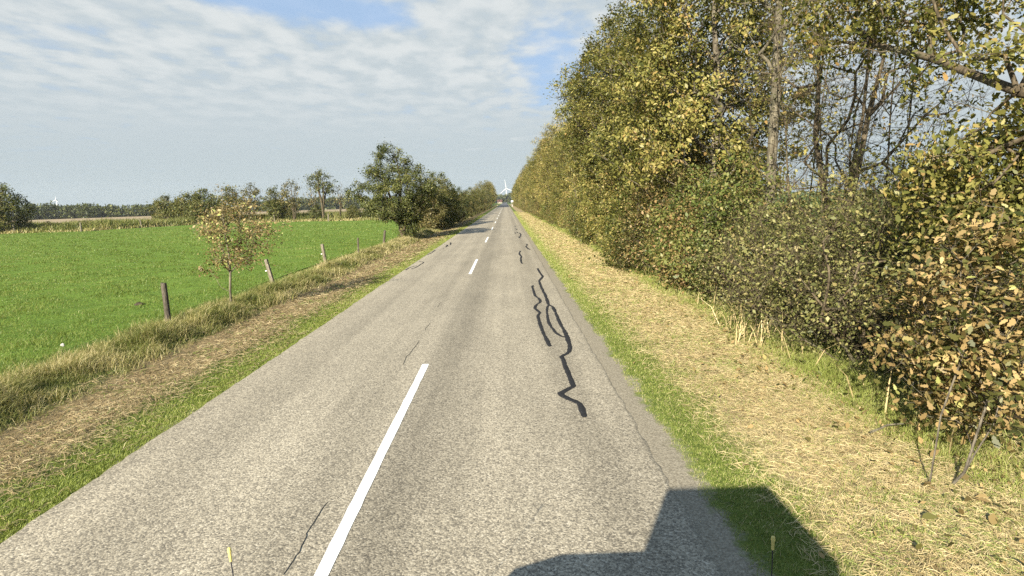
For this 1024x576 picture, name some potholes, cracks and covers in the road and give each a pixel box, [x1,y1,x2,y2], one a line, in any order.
crack [282,502,328,575]
